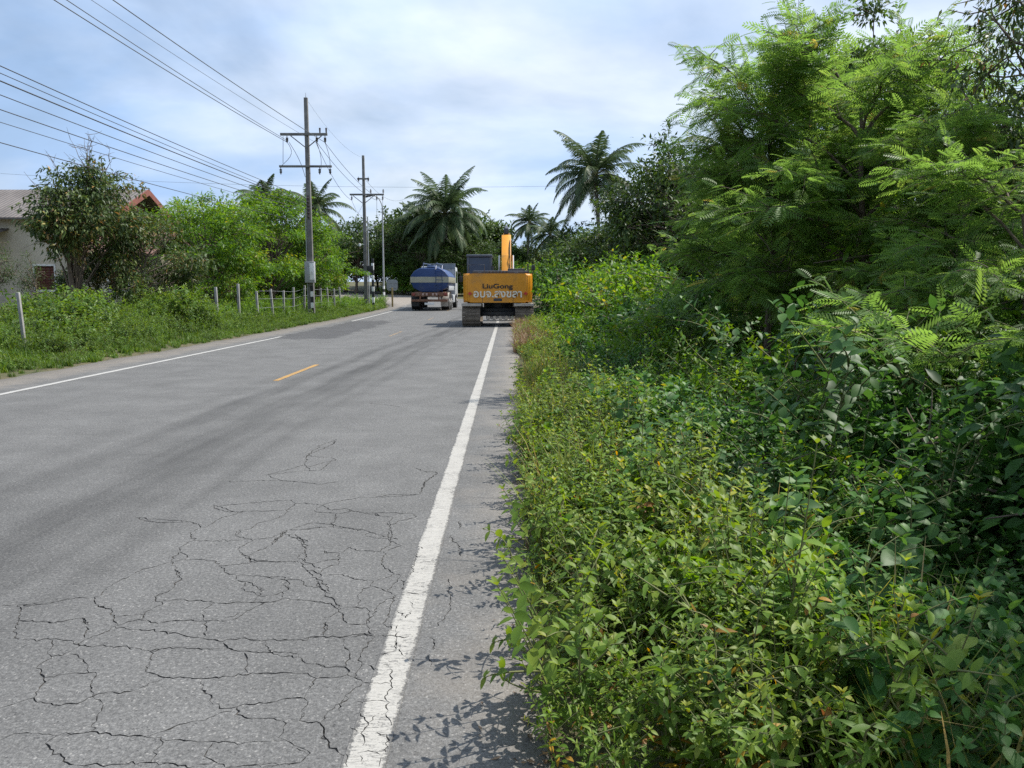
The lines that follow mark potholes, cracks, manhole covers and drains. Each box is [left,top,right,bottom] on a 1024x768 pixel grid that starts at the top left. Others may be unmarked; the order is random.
crack [139,405,437,563]
crack [3,494,415,768]
